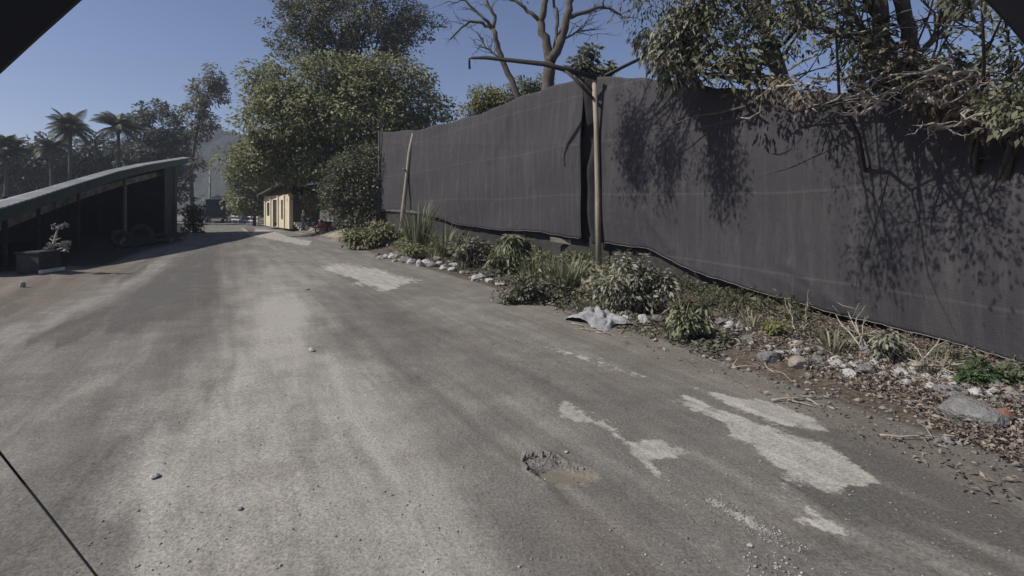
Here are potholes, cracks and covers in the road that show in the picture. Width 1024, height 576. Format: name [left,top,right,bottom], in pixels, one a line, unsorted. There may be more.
pothole [496,446,621,508]
